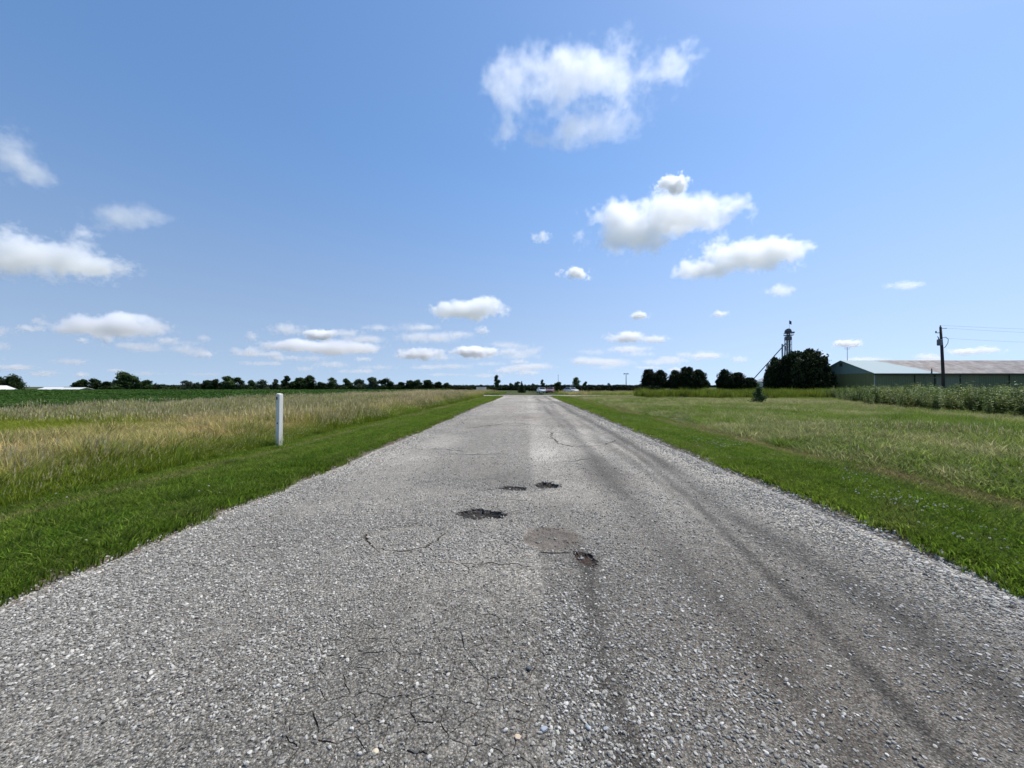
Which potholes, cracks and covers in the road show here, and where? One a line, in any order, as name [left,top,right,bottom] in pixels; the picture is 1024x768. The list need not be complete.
pothole [573,551,599,568]
pothole [535,481,560,489]
pothole [456,509,508,520]
crack [282,614,540,768]
crack [363,533,570,575]
